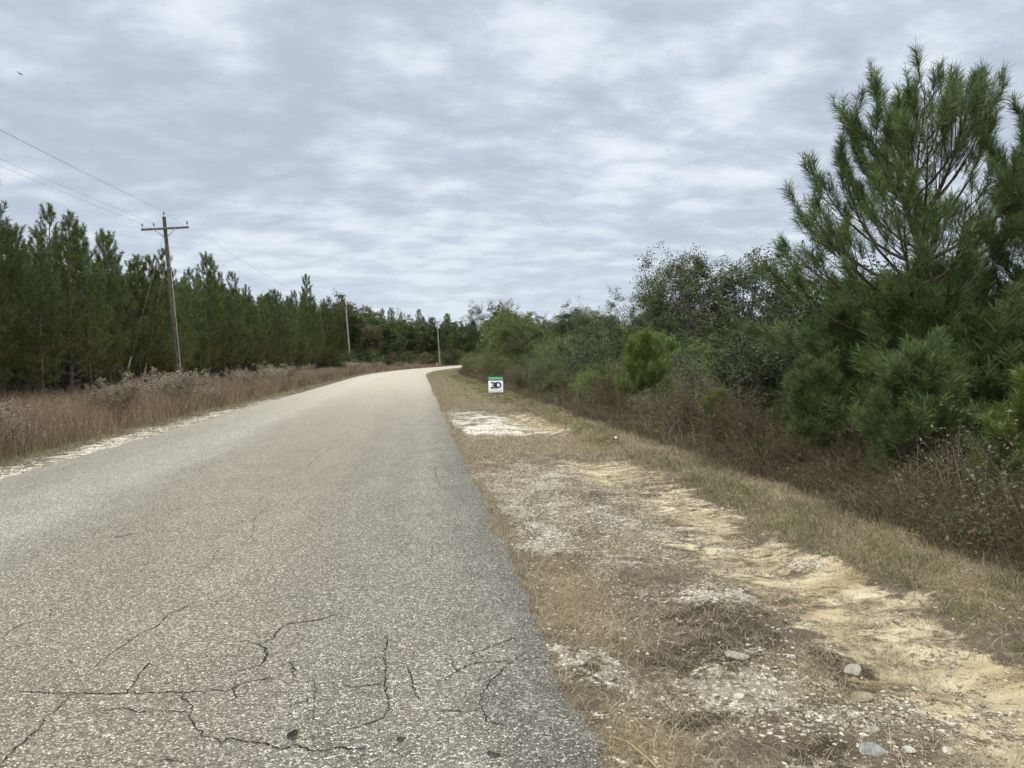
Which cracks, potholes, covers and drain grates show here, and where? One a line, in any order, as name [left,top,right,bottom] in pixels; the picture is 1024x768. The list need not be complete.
crack [2,604,391,762]
crack [436,637,545,725]
